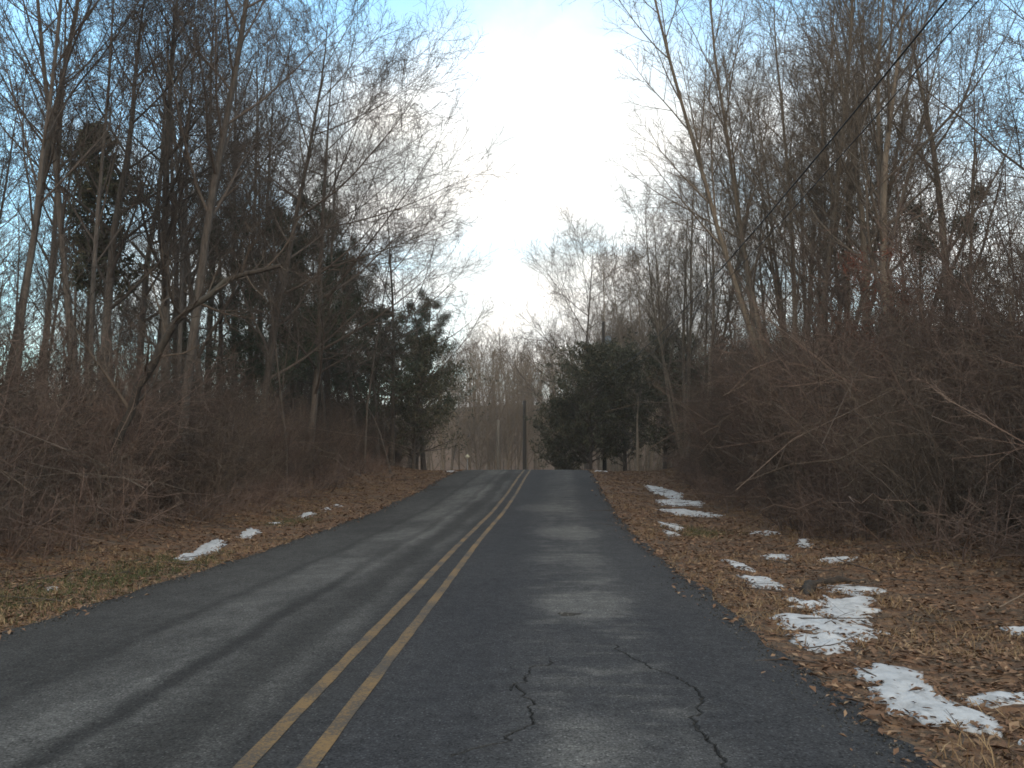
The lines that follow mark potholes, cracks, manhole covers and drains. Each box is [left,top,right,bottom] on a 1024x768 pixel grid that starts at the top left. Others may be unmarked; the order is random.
crack [614,645,728,768]
crack [439,661,570,758]
